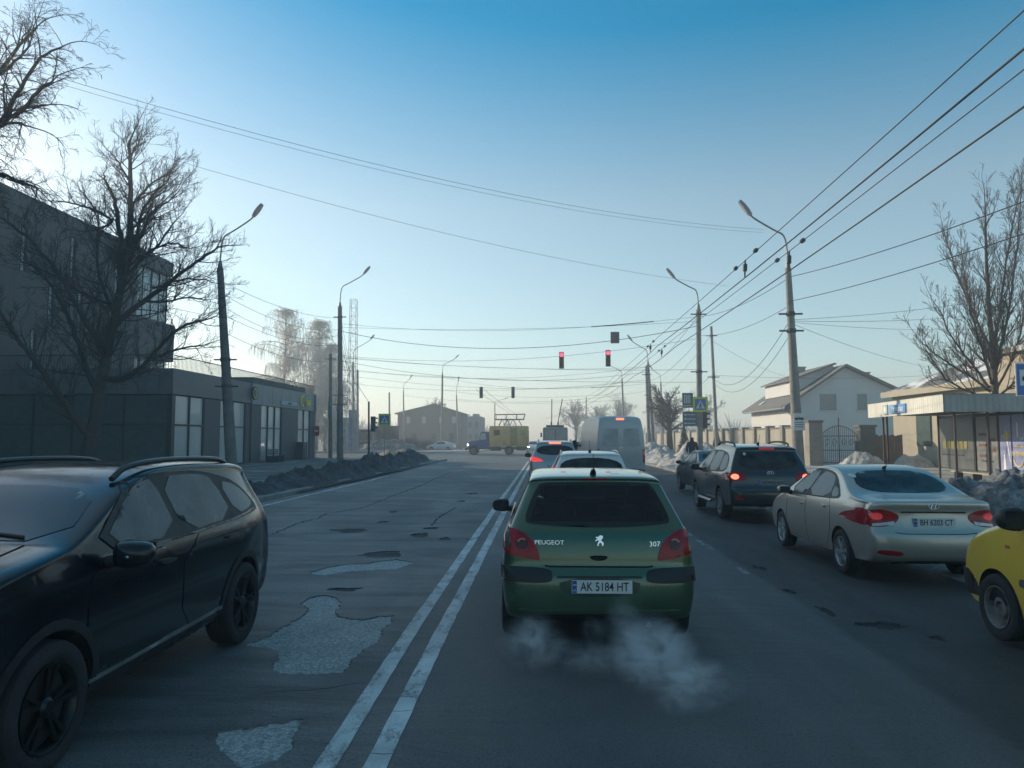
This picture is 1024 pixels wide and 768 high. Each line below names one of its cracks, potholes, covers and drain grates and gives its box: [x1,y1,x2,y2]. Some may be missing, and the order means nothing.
pothole [854,621,909,630]
